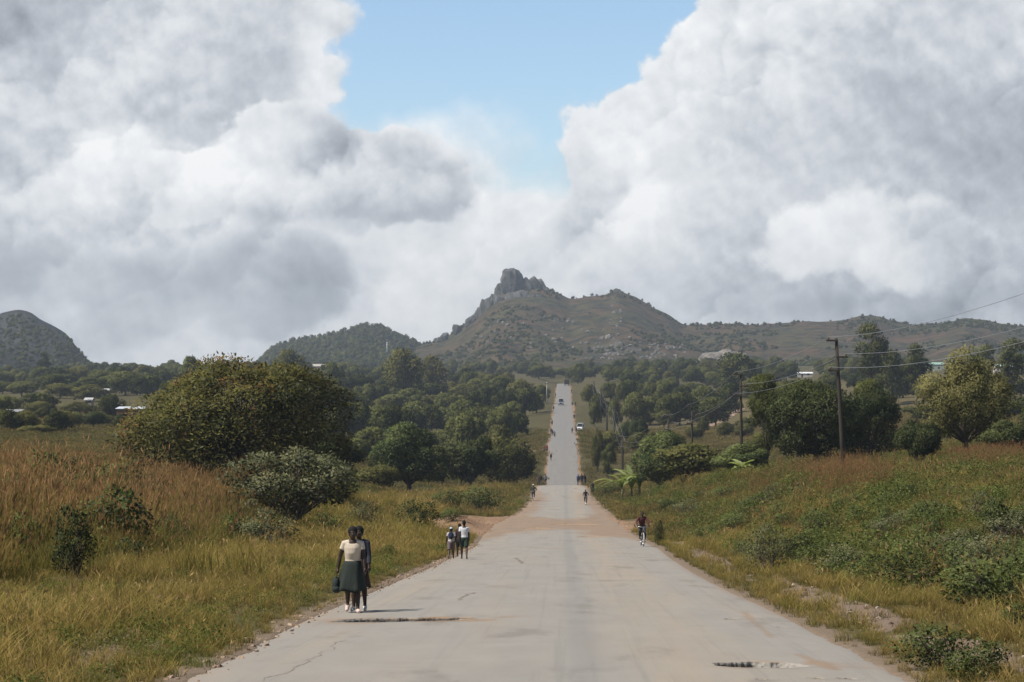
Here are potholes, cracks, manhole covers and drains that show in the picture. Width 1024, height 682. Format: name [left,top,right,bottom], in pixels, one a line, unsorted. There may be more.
pothole [703,661,819,669]
